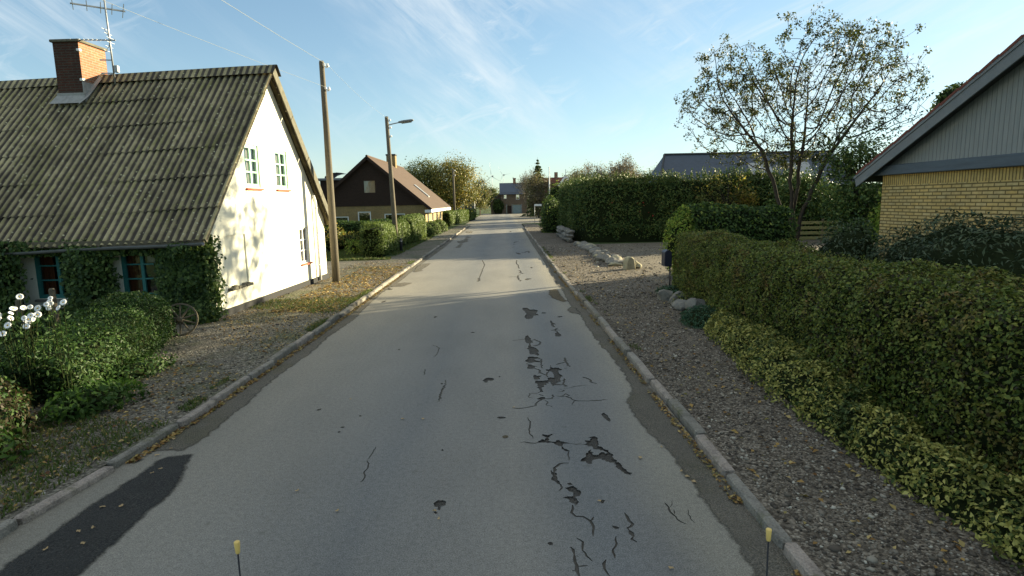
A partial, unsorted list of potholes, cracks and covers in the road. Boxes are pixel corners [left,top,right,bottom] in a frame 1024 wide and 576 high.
crack [513,328,605,444]
crack [553,443,637,576]
pothole [522,308,538,319]
pothole [581,436,632,475]
crack [665,503,695,524]
